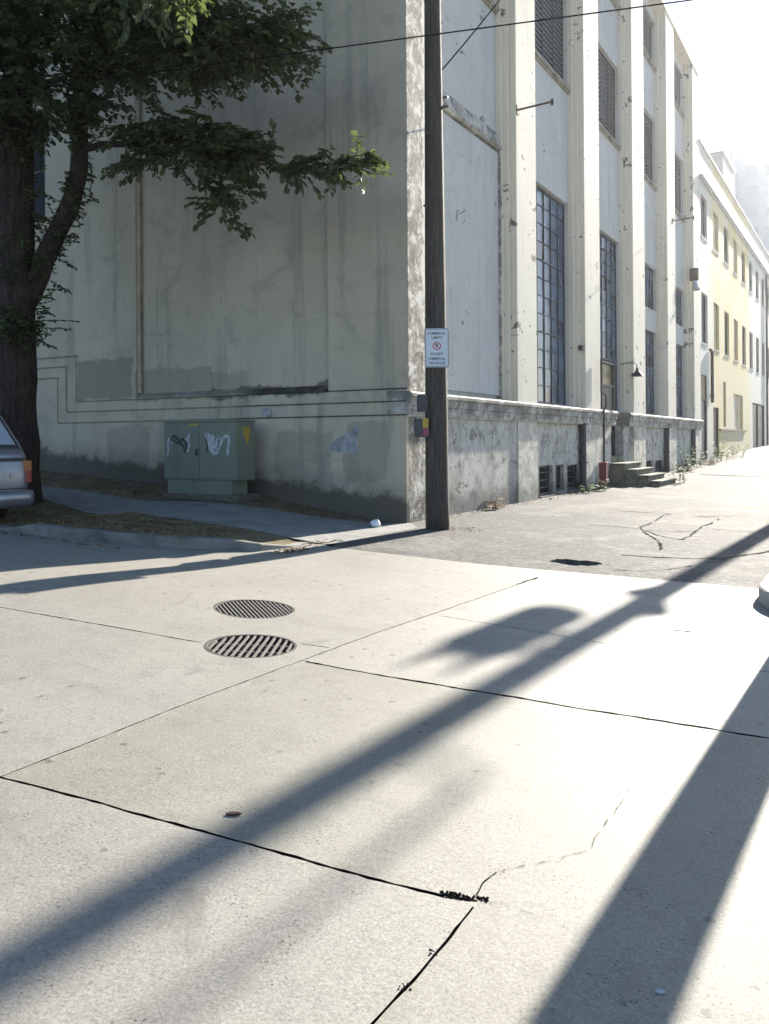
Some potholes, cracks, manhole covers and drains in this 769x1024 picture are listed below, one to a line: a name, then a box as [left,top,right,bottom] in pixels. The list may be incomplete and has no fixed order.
crack [476,787,631,913]
crack [584,511,769,571]
